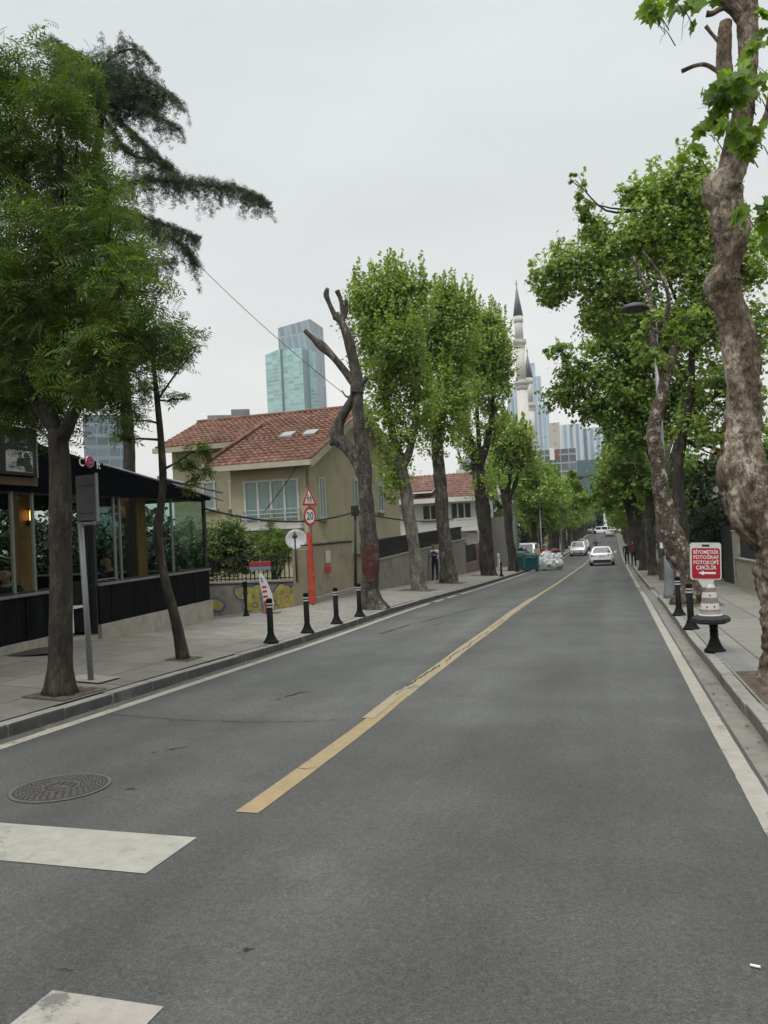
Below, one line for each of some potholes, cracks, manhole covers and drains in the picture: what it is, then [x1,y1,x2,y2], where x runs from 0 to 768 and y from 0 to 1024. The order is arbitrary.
manhole cover [8,773,112,803]
